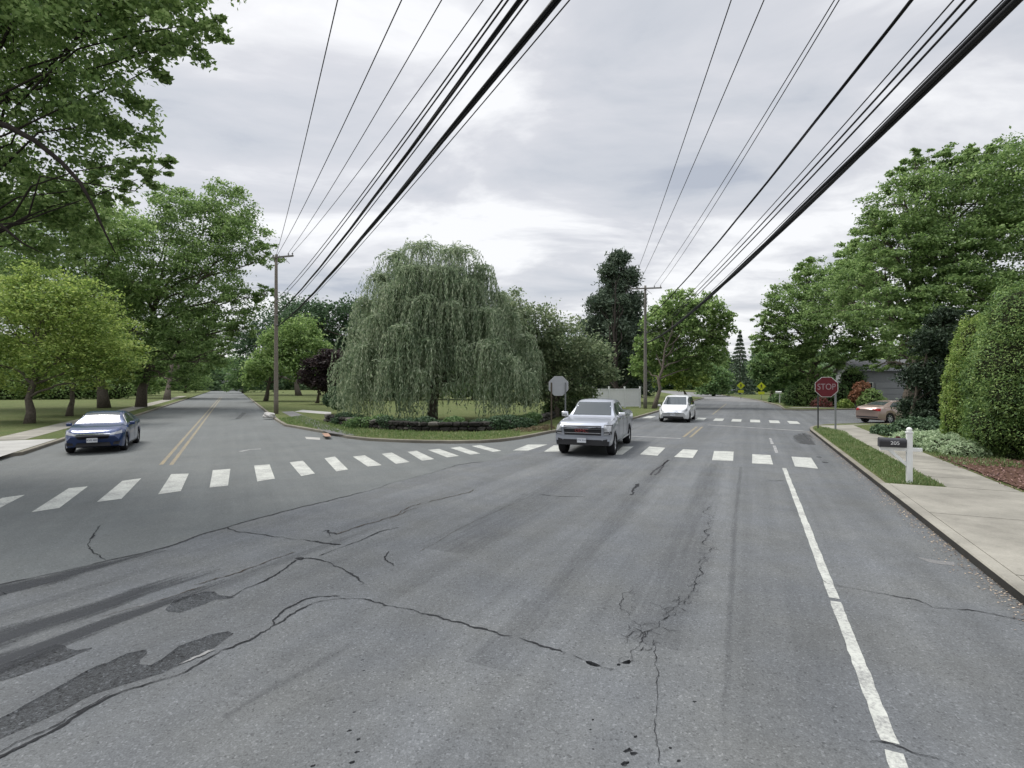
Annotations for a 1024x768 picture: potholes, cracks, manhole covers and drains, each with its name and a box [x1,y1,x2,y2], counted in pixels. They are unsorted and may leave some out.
crack [823,580,1018,619]
crack [619,507,718,764]
crack [630,460,669,495]
crack [0,527,610,758]
